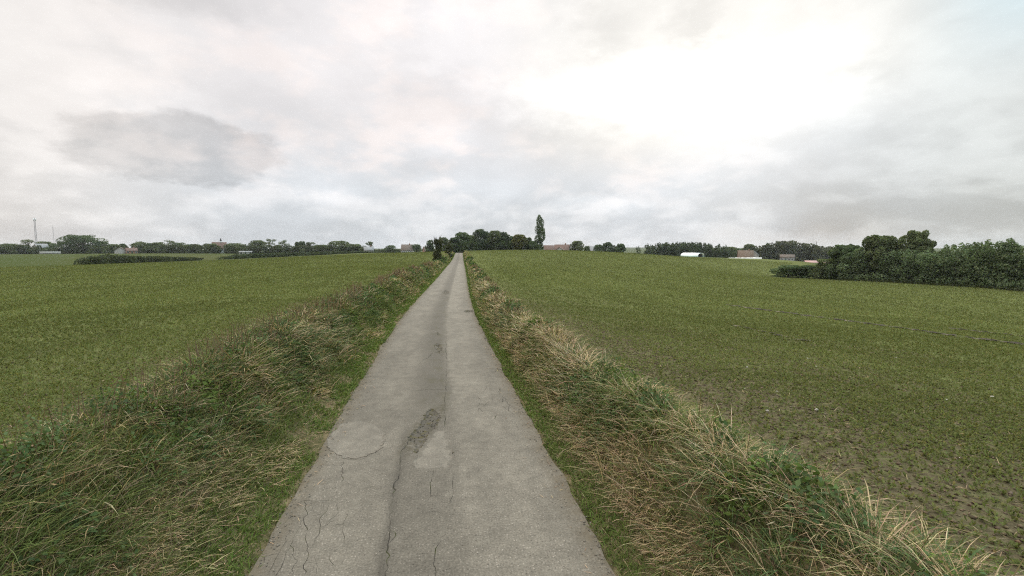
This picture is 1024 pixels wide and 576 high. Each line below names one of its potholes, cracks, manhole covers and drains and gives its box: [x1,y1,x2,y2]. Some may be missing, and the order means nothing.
pothole [407,409,441,453]
crack [264,448,374,575]
